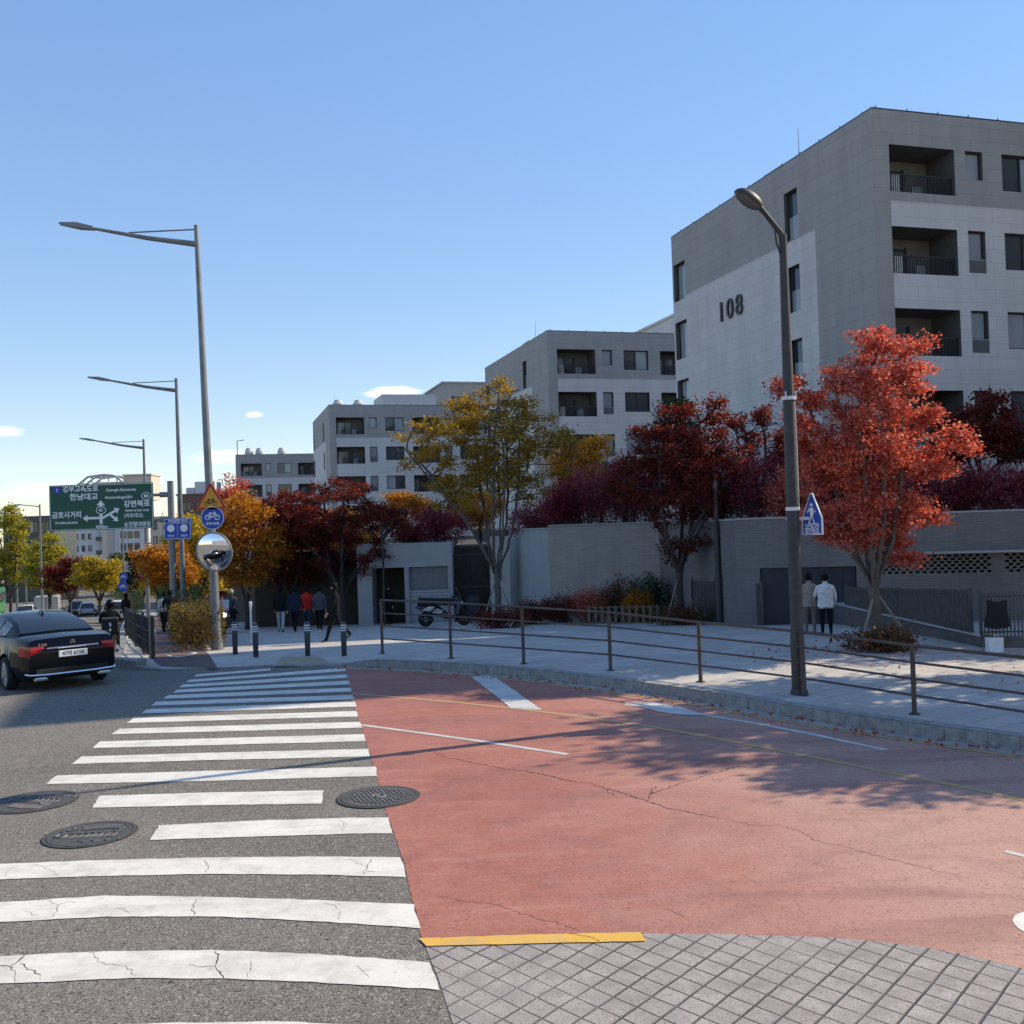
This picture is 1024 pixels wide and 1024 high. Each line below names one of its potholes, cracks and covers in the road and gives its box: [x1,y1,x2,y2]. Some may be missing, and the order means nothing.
crack [0,952,40,981]
crack [434,752,966,878]
manhole cover [336,786,420,808]
manhole cover [0,790,79,814]
manhole cover [40,821,138,848]
